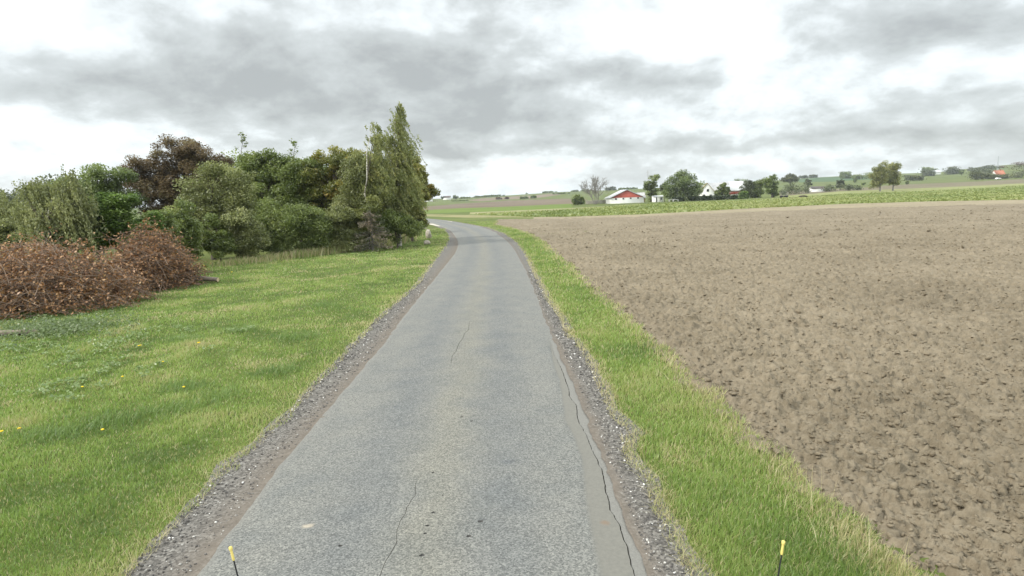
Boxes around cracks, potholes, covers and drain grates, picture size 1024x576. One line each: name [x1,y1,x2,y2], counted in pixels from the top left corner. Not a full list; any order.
crack [380,474,422,575]
